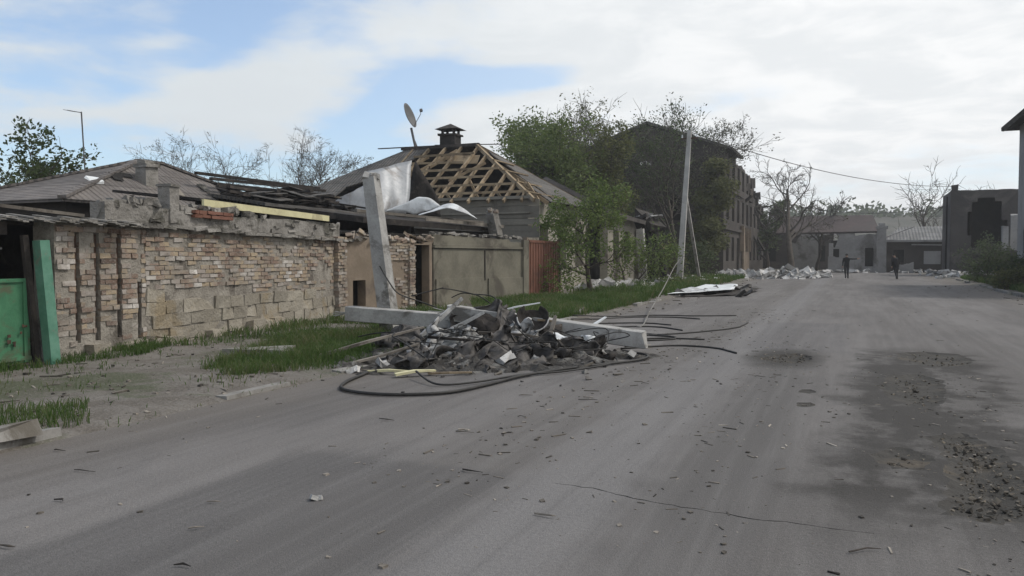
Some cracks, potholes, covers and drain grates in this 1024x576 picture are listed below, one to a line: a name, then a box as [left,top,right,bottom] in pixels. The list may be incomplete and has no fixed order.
pothole [923,433,1024,525]
pothole [759,353,813,363]
crack [556,483,867,533]
pothole [896,352,976,368]
